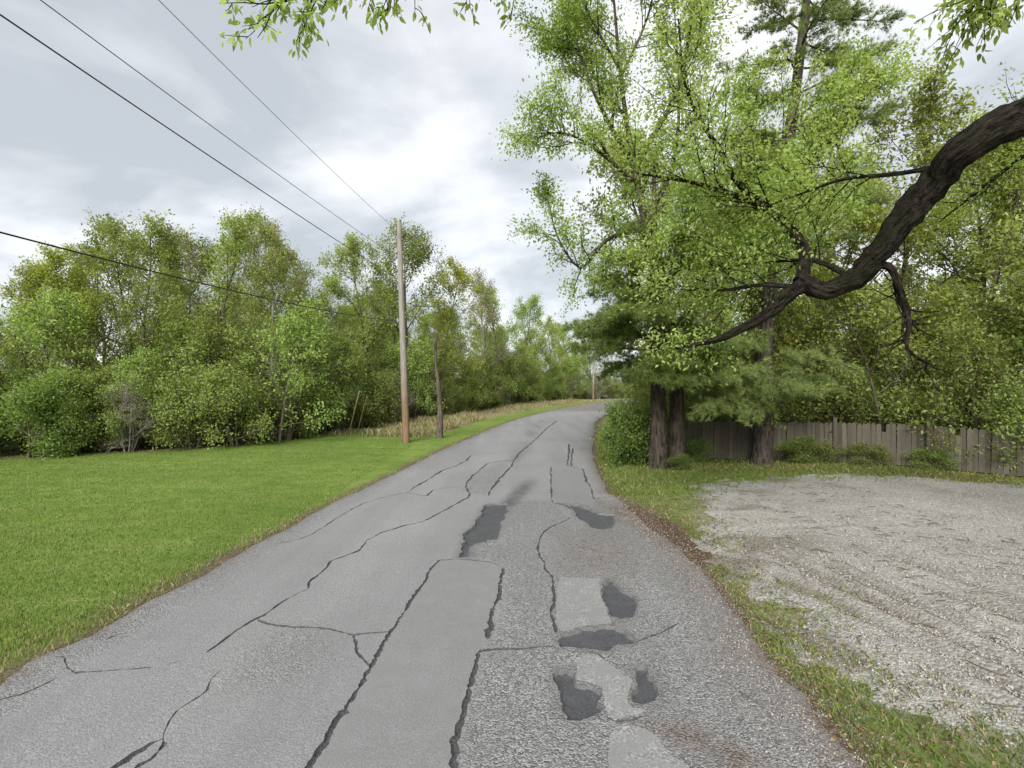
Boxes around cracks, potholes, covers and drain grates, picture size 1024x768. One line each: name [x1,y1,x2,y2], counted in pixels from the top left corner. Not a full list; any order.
pothole [601,579,639,619]
pothole [631,666,659,704]
crack [636,623,678,643]
crack [0,656,151,700]
pothole [570,504,616,530]
crack [207,421,609,768]
pothole [552,669,602,721]
pothole [558,625,636,651]
pothole [459,503,509,557]
crack [111,660,218,768]
